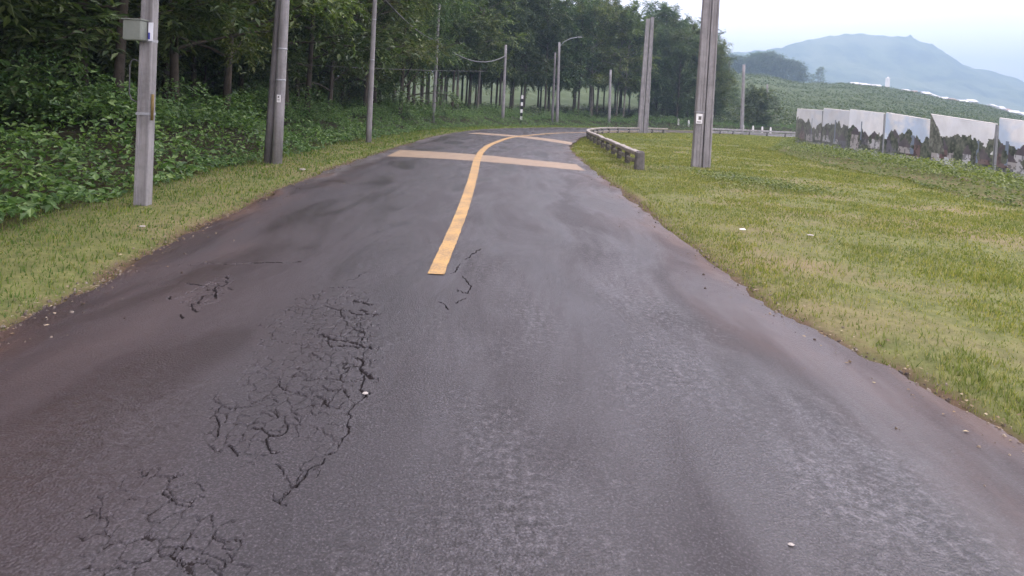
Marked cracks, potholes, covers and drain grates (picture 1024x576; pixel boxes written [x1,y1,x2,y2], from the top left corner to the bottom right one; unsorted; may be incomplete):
crack [439,248,482,310]
crack [46,261,383,576]
